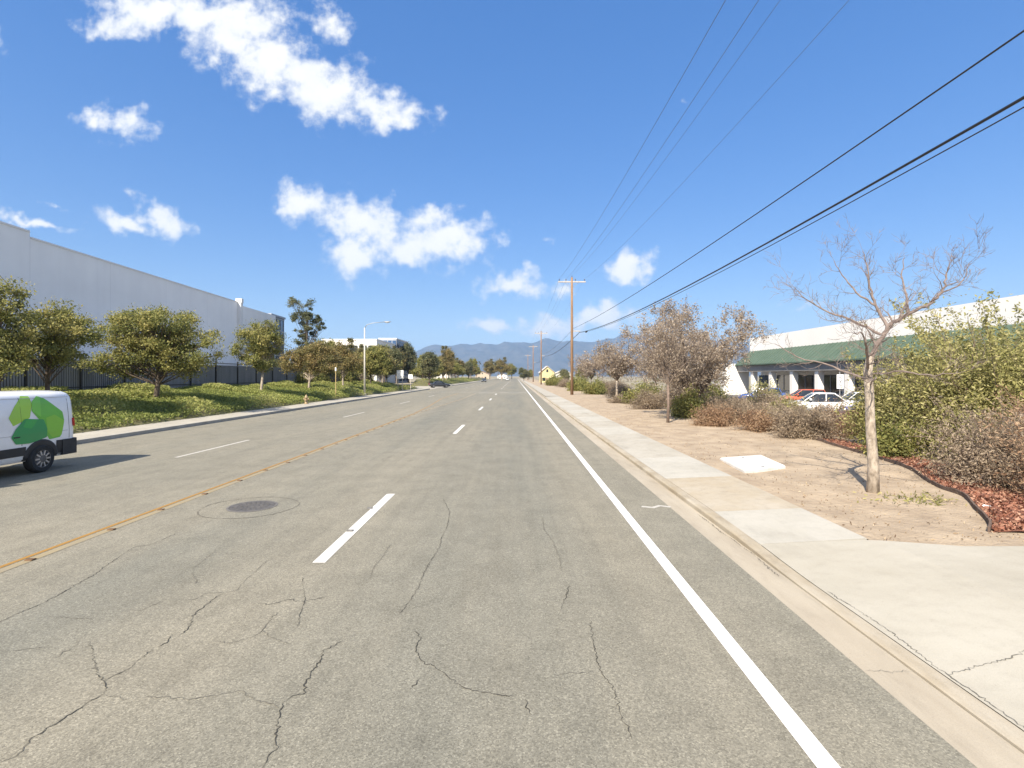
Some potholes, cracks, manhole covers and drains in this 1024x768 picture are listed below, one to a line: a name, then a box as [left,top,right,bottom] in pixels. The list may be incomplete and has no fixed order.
manhole cover [226,500,278,512]
crack [559,623,632,738]
crack [410,630,511,696]
crack [0,534,341,766]
